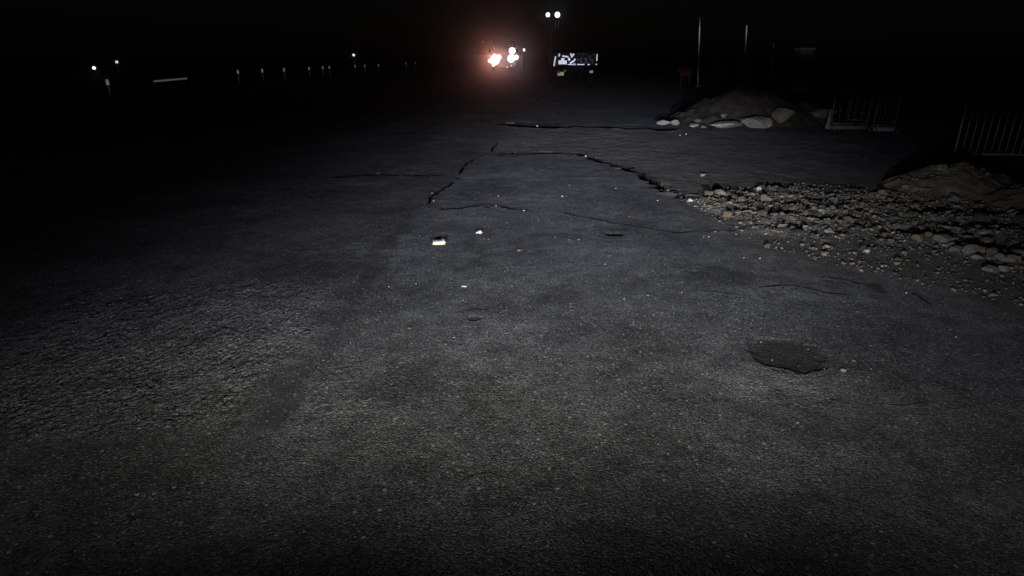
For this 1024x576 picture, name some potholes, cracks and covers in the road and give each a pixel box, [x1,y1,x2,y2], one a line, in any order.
crack [693,273,939,305]
crack [323,101,909,235]
pothole [588,229,641,240]
pothole [727,329,850,383]
pothole [452,309,497,327]
